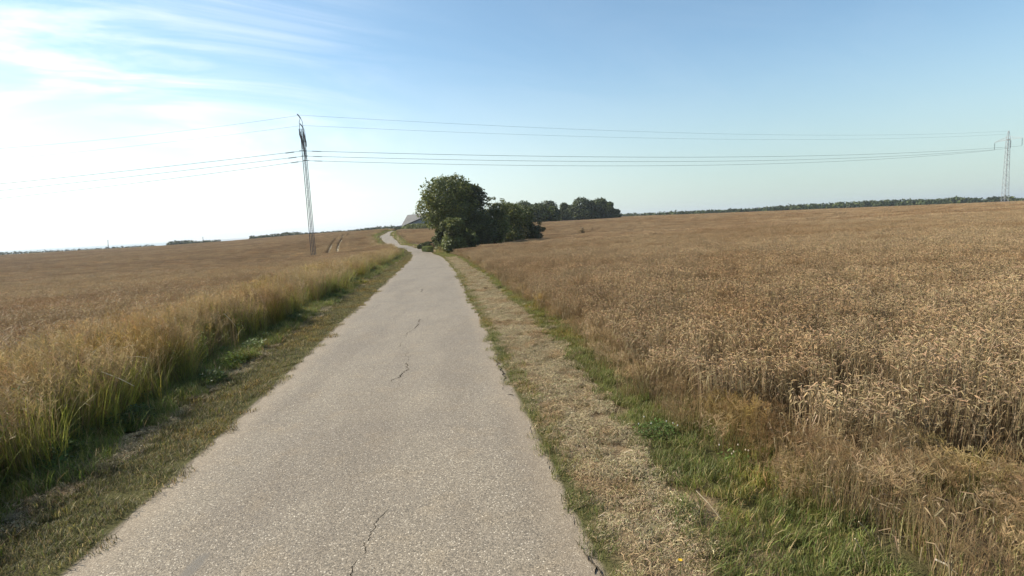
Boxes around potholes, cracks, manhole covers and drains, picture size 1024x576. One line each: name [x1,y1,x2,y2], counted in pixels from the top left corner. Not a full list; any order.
crack [350,512,385,576]
